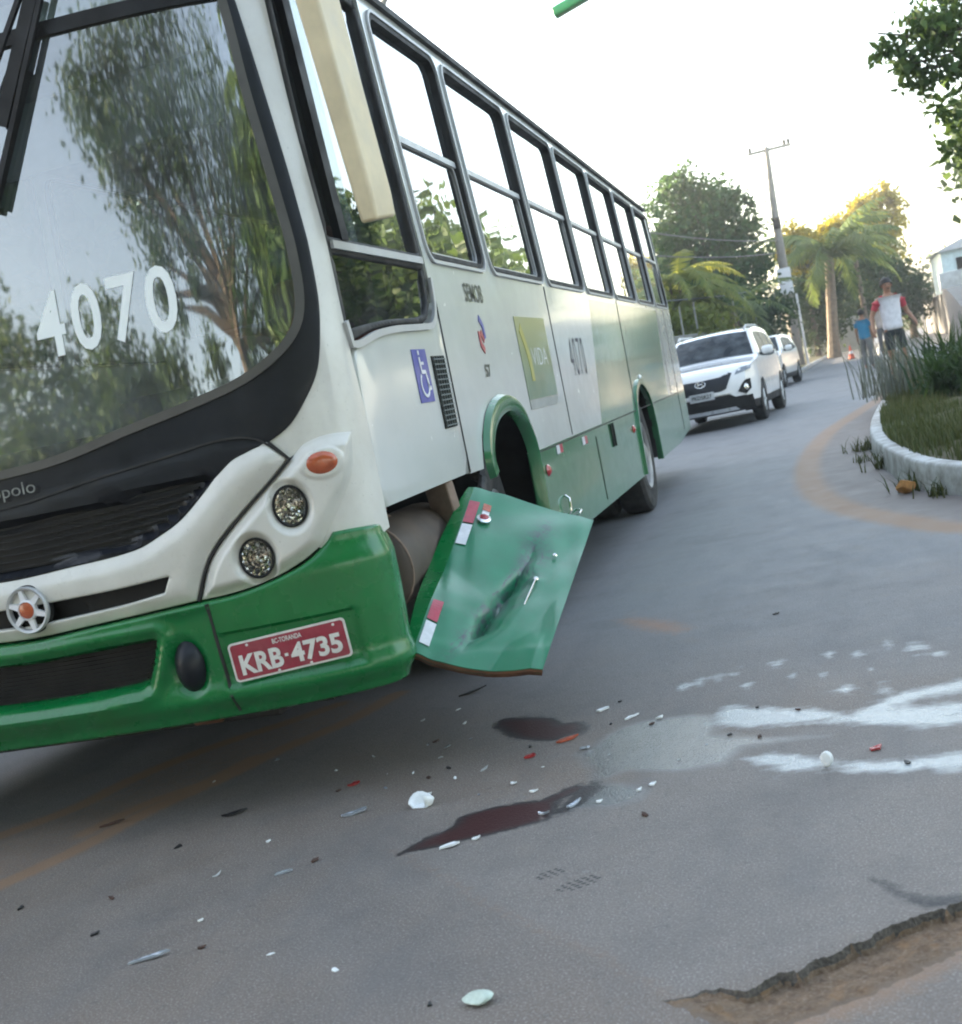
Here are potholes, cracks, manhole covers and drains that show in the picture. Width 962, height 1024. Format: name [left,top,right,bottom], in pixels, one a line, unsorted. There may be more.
pothole [662,901,962,1024]
